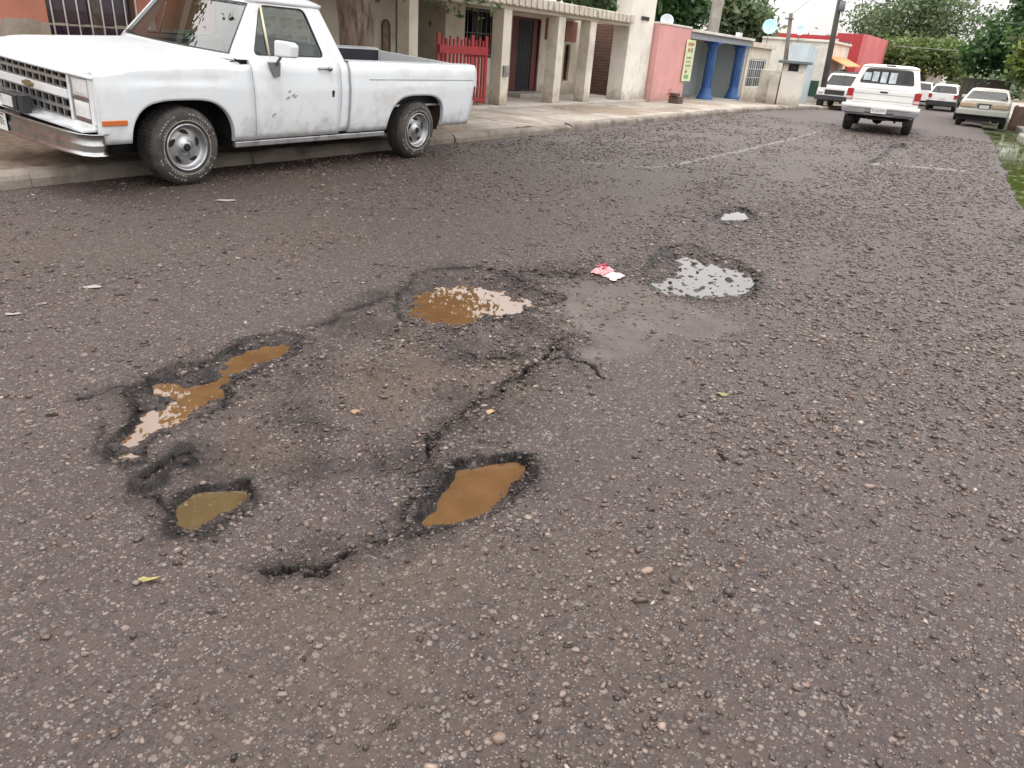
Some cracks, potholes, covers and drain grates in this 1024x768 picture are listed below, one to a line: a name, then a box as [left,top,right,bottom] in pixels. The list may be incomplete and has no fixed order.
pothole [641,244,764,301]
pothole [391,266,568,333]
pothole [101,330,306,465]
pothole [164,476,261,536]
pothole [400,450,540,540]
pothole [715,206,757,225]
crack [414,334,606,474]
crack [257,533,402,579]
